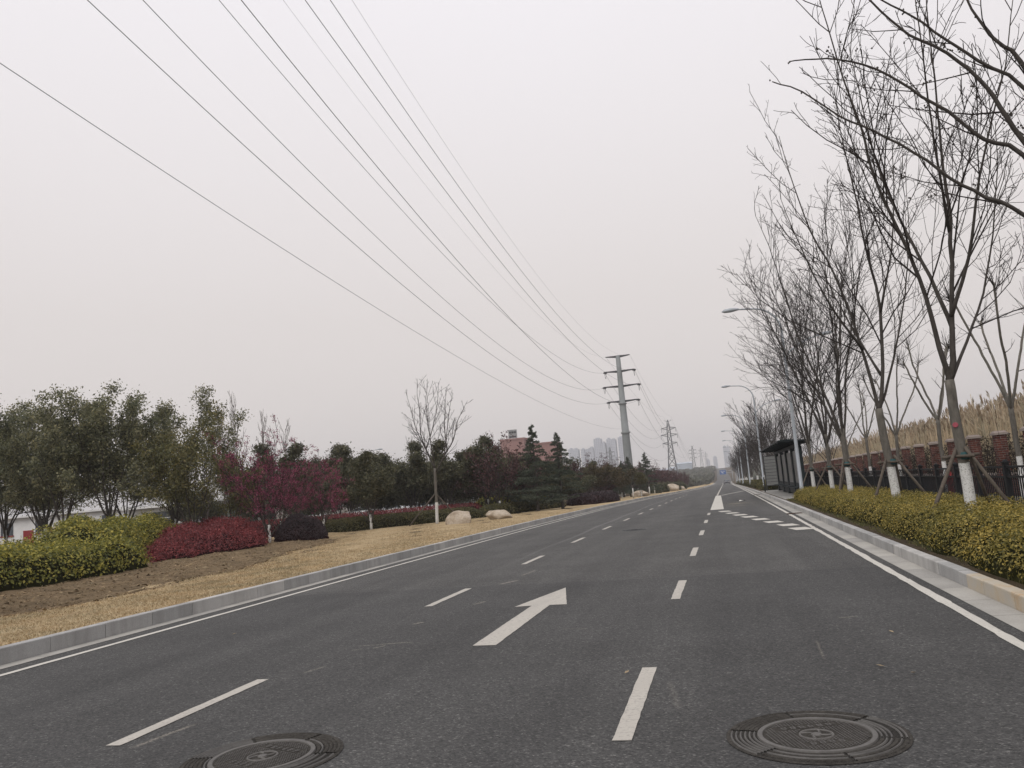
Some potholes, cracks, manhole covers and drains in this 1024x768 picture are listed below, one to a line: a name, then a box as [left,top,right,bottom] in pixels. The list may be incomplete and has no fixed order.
manhole cover [179,732,344,768]
manhole cover [726,710,913,765]
